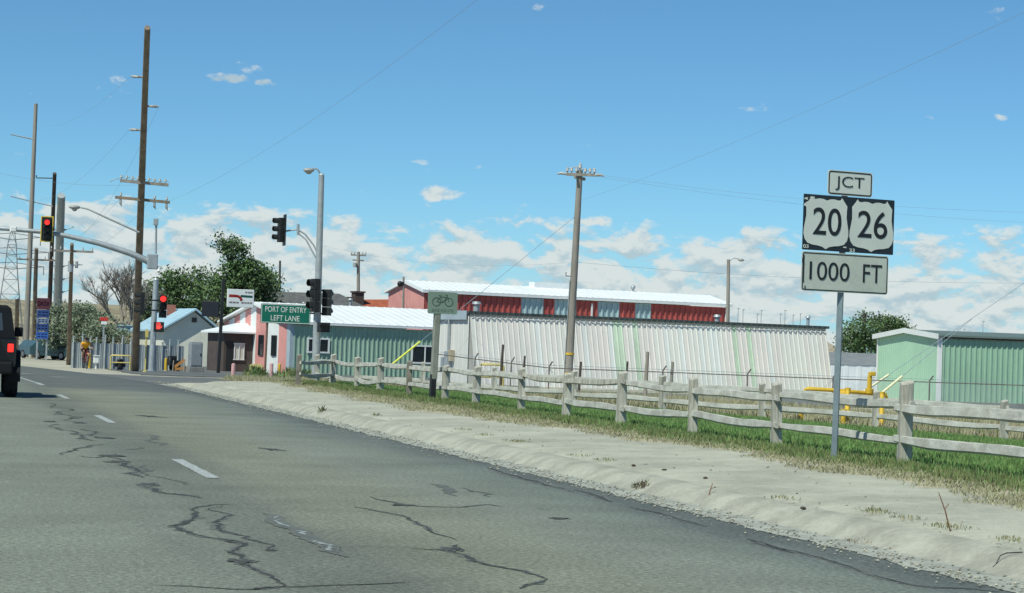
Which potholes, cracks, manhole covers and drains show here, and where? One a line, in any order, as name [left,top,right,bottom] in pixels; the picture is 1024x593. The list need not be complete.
crack [48,403,405,590]
crack [357,467,708,589]
crack [746,538,998,592]
